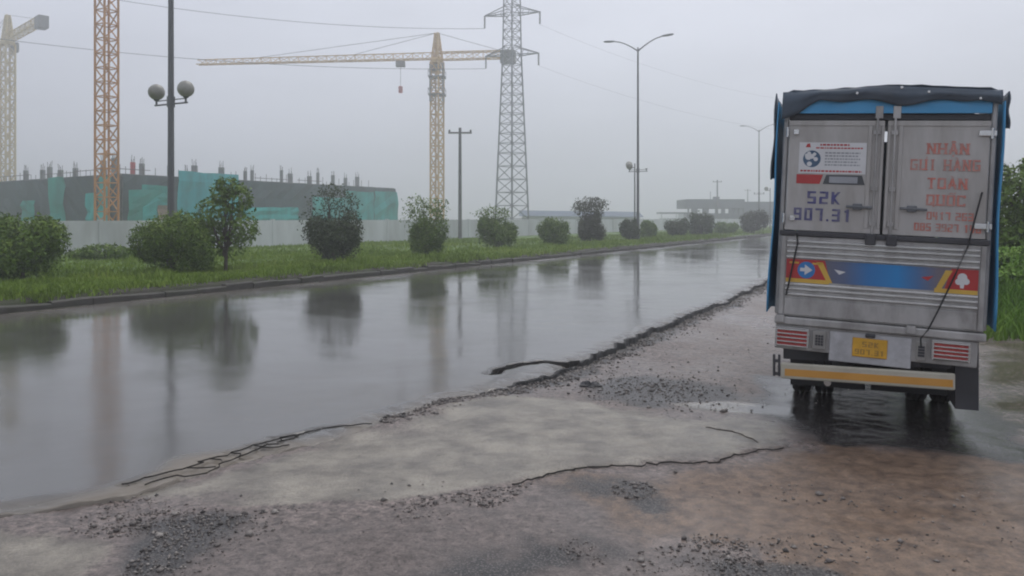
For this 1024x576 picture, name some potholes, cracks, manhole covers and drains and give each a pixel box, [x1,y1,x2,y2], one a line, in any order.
crack [122,423,372,485]
crack [512,427,784,485]
crack [491,360,580,375]
